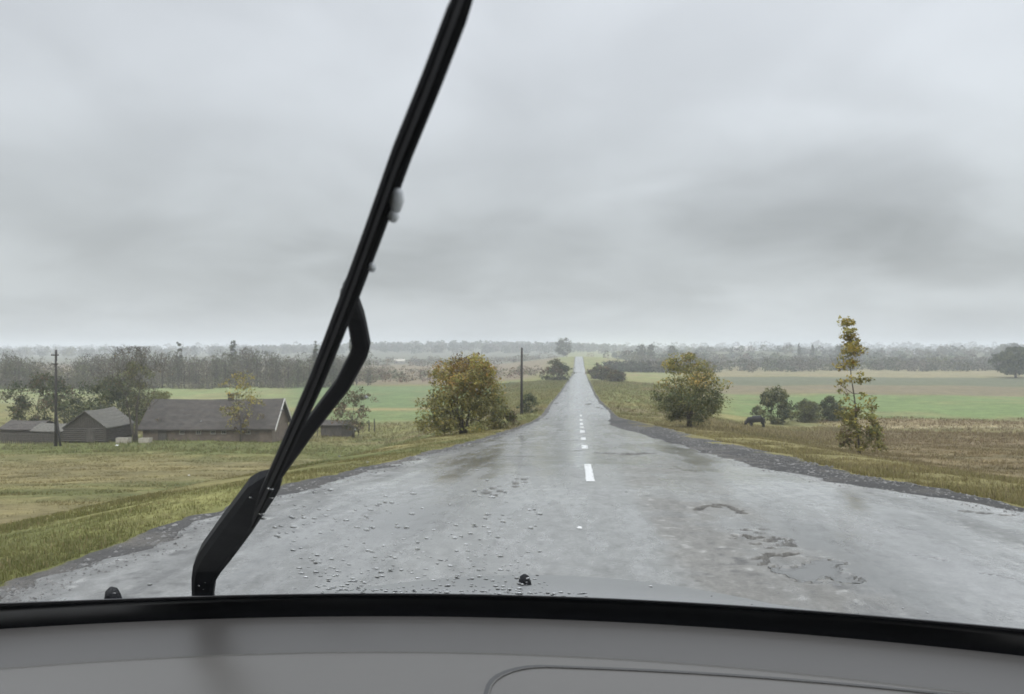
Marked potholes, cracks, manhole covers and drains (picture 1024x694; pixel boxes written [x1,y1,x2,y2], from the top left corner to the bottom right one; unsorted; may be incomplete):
pothole [726,528,800,549]
pothole [764,556,869,586]
